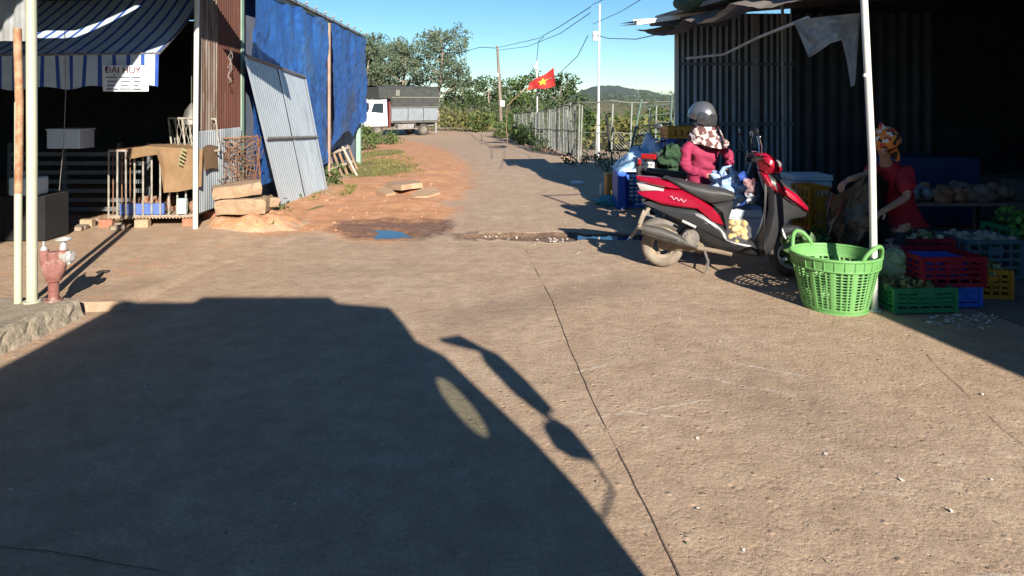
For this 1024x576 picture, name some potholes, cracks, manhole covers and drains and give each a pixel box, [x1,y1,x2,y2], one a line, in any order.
pothole [452,231,657,244]
pothole [328,217,453,240]
